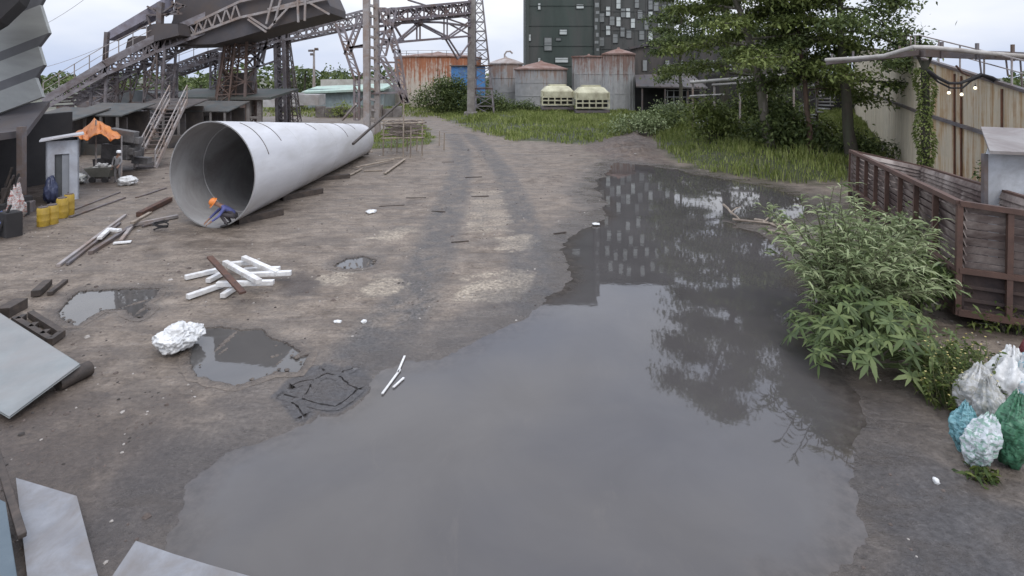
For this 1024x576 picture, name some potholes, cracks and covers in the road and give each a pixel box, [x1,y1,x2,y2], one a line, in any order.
pothole [48,285,168,329]
crack [277,366,364,419]
pothole [178,322,317,391]
pothole [326,254,383,271]
